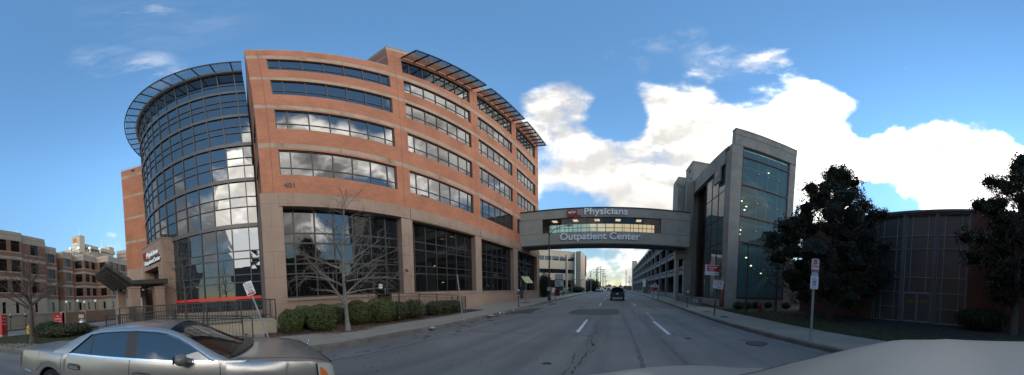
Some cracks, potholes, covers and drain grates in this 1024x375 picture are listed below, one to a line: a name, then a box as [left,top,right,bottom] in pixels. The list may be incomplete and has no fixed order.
crack [562,316,615,375]
